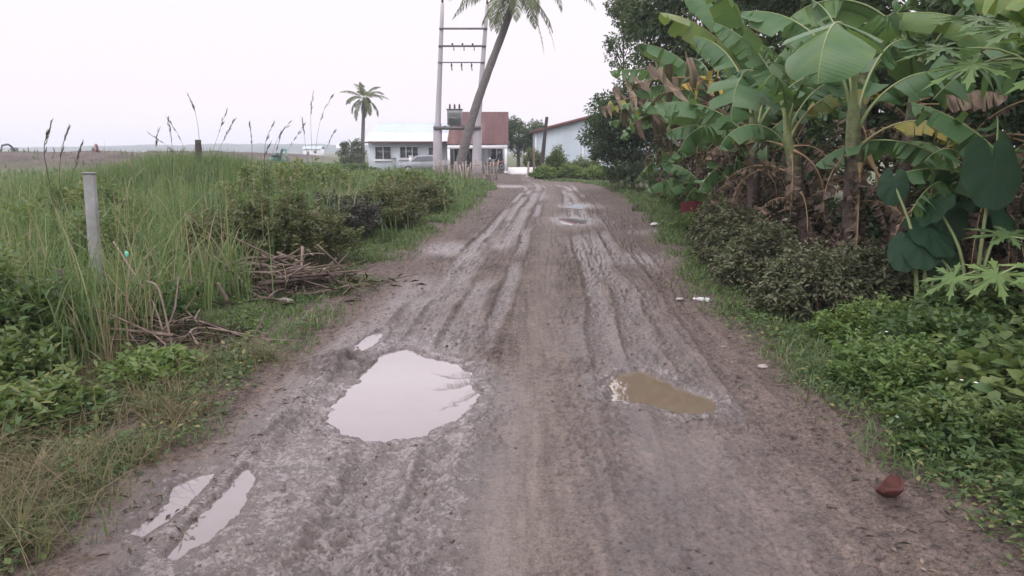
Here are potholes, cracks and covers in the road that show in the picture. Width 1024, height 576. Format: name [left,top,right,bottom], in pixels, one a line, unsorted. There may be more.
pothole [306,343,502,453]
pothole [585,361,739,423]
